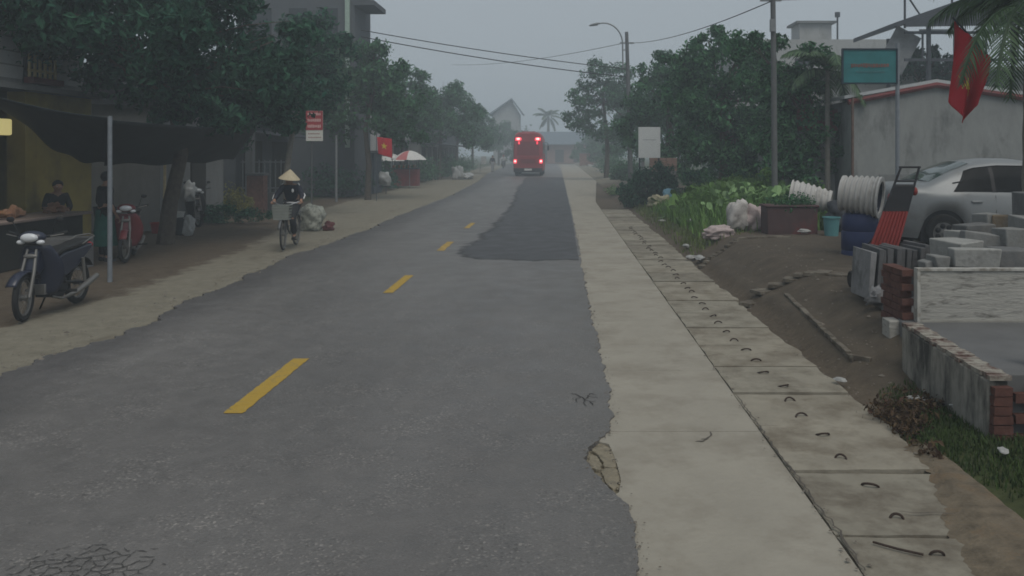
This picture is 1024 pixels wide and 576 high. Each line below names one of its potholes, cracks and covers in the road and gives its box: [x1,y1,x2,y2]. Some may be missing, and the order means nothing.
pothole [586,444,622,494]
crack [7,544,165,576]
